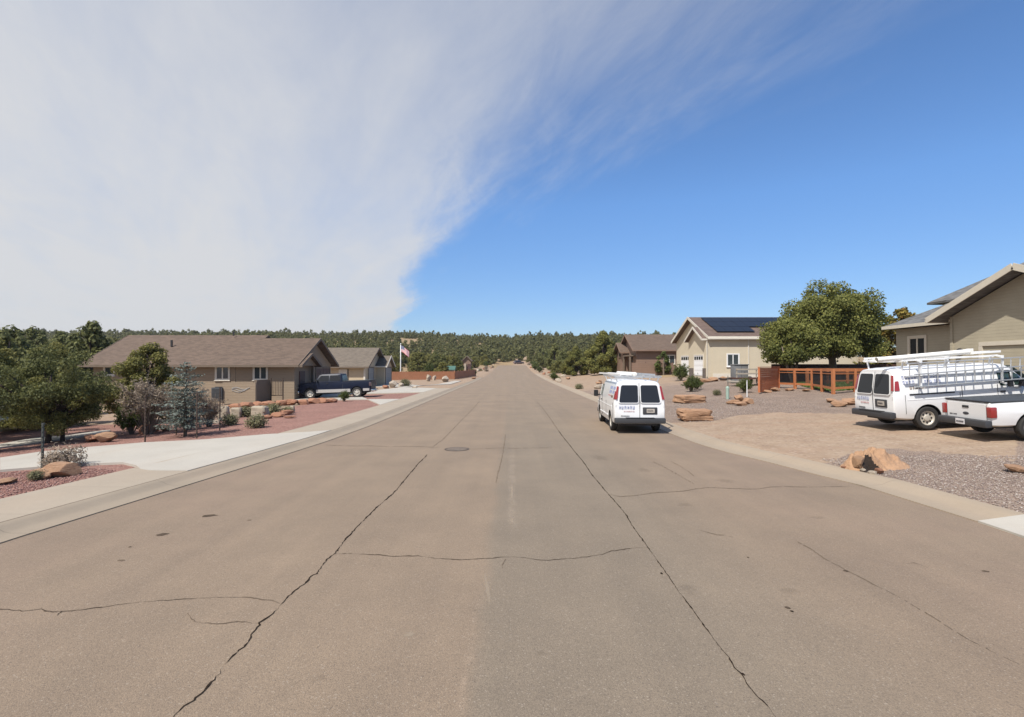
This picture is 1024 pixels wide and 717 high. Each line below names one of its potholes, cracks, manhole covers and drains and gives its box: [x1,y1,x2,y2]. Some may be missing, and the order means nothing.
crack [9,402,842,717]
crack [797,541,1019,664]
